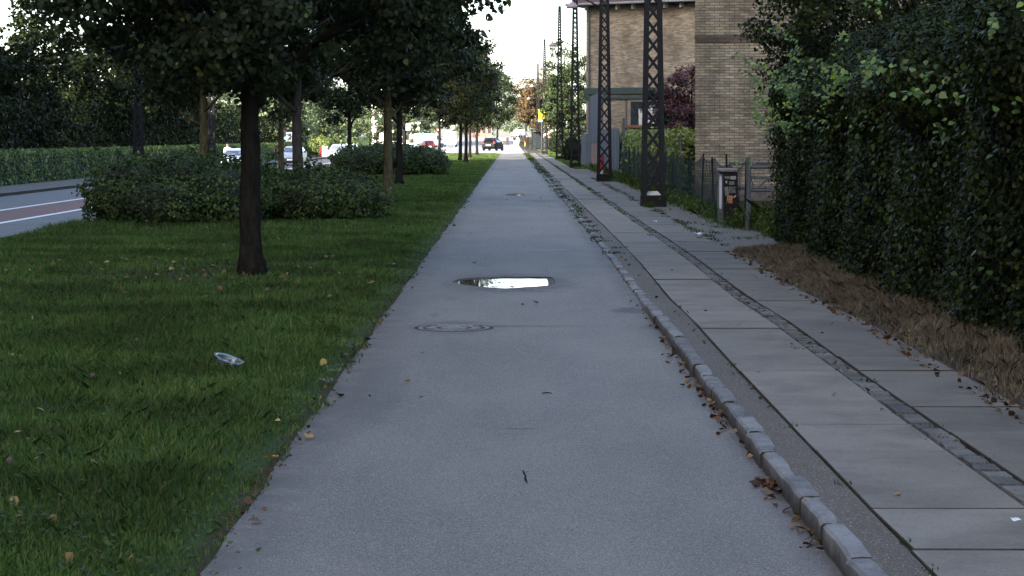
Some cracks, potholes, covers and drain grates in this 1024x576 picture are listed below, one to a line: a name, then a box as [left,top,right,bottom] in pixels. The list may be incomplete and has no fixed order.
manhole cover [414,324,494,332]
pothole [453,277,555,288]
